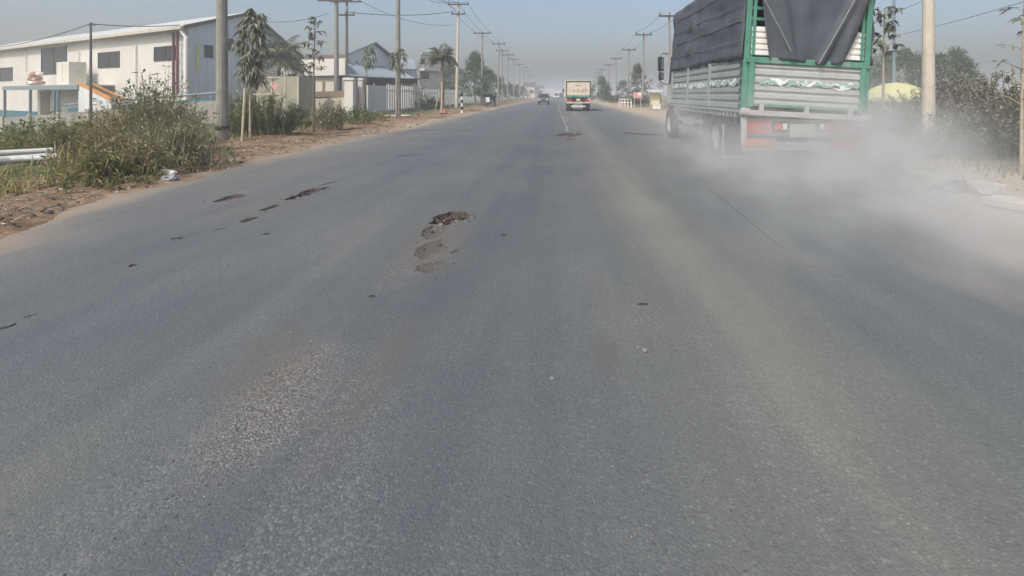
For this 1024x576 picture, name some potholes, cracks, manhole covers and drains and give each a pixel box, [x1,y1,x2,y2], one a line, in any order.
pothole [281,187,331,200]
pothole [423,211,476,227]
pothole [203,194,246,203]
